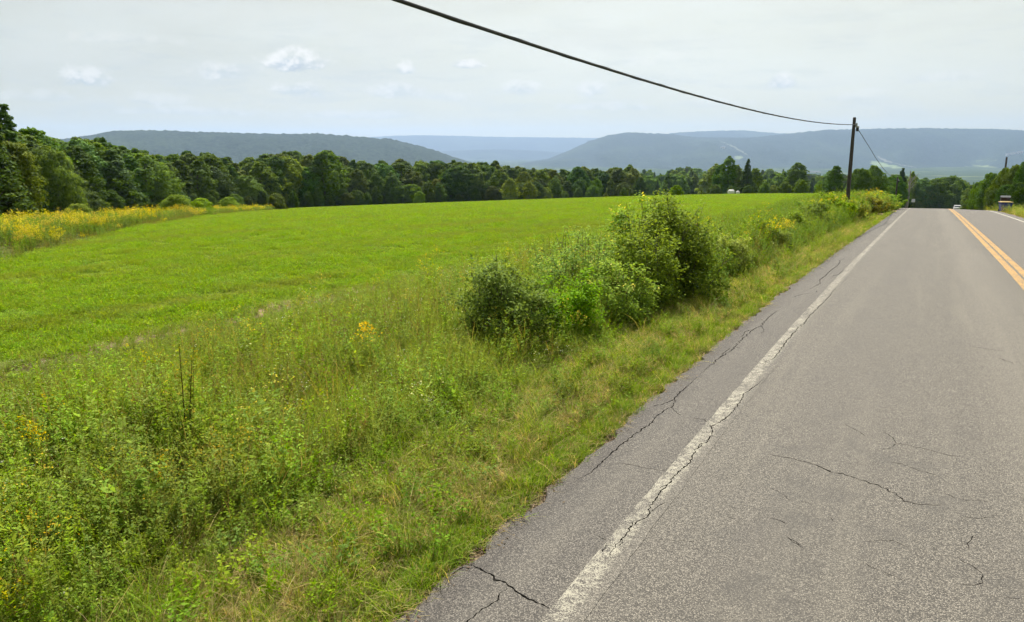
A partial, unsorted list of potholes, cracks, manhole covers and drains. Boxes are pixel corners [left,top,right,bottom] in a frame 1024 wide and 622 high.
crack [768,260,840,361]
crack [577,311,777,553]
crack [451,565,550,622]
crack [774,455,929,505]
crack [947,494,995,585]
